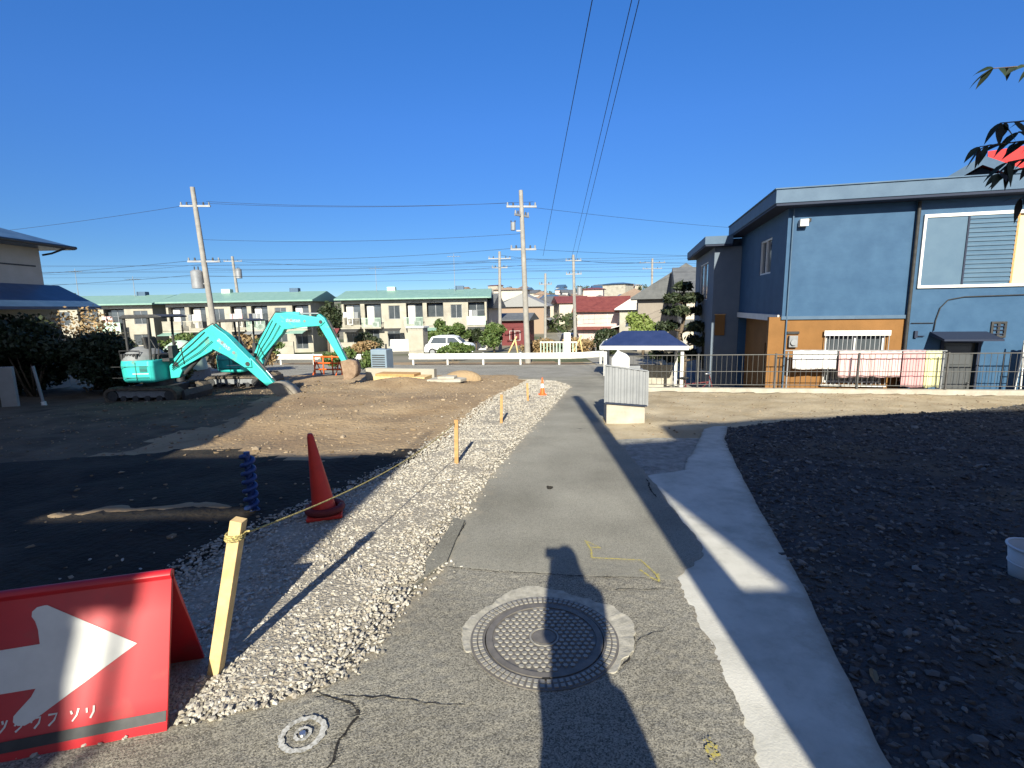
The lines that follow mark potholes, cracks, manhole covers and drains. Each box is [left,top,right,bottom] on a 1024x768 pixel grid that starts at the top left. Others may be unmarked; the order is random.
crack [308,689,469,768]
manhole cover [461,586,636,691]
